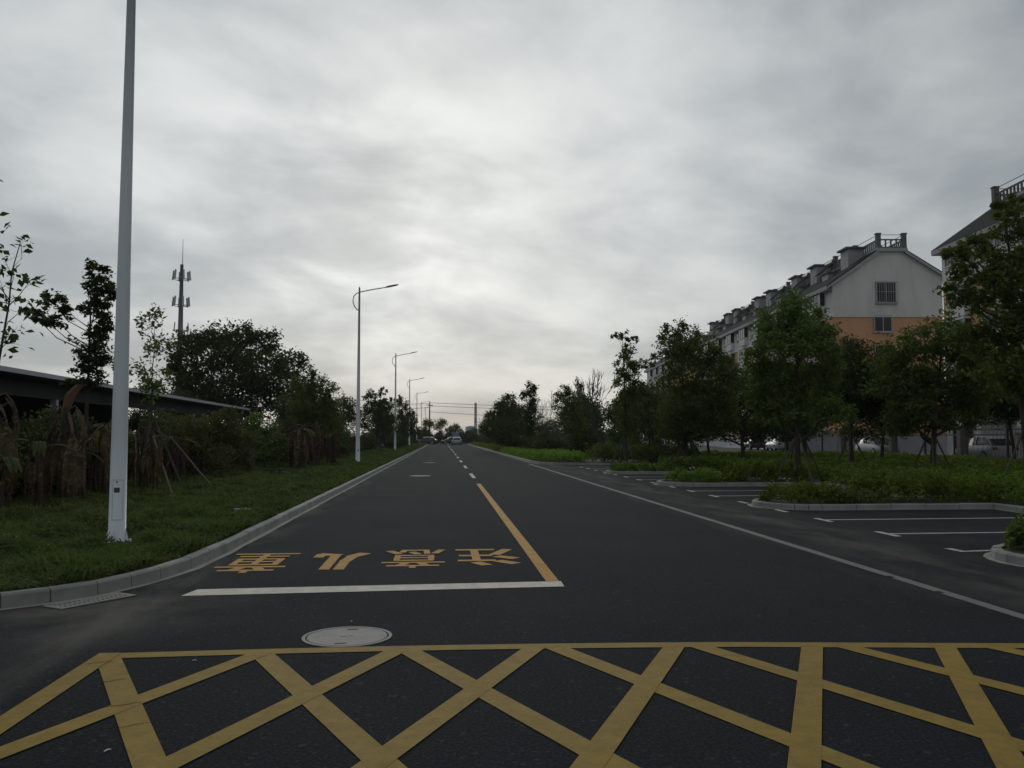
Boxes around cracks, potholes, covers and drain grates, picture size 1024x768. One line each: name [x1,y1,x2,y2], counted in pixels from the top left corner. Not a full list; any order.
manhole cover [302,626,392,647]
drain grate [43,592,136,609]
